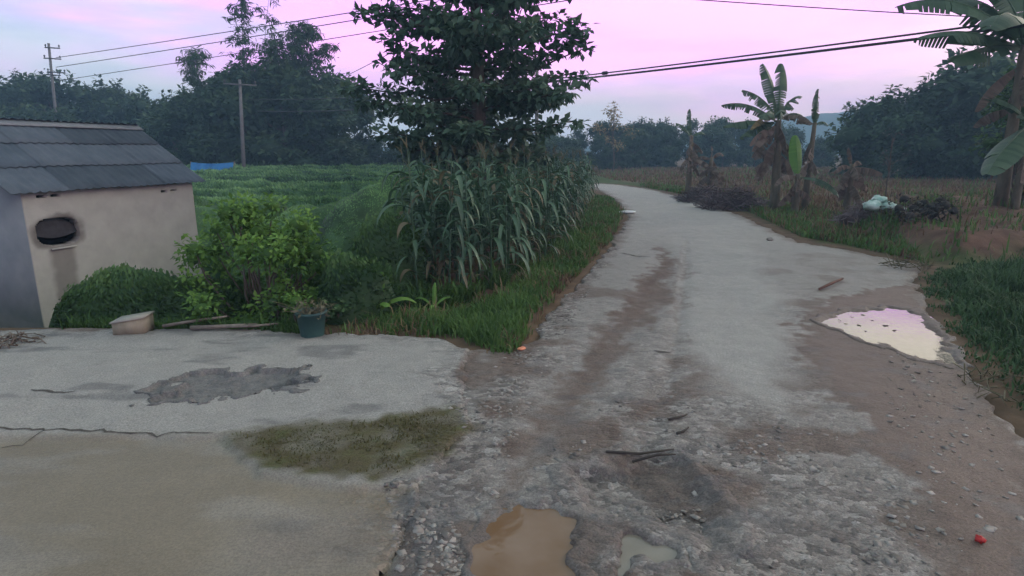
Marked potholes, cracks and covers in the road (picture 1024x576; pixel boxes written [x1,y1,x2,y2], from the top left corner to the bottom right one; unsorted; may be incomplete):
crack [0,427,211,448]
pothole [809,304,975,369]
pothole [545,440,757,574]
pothole [458,480,622,576]
